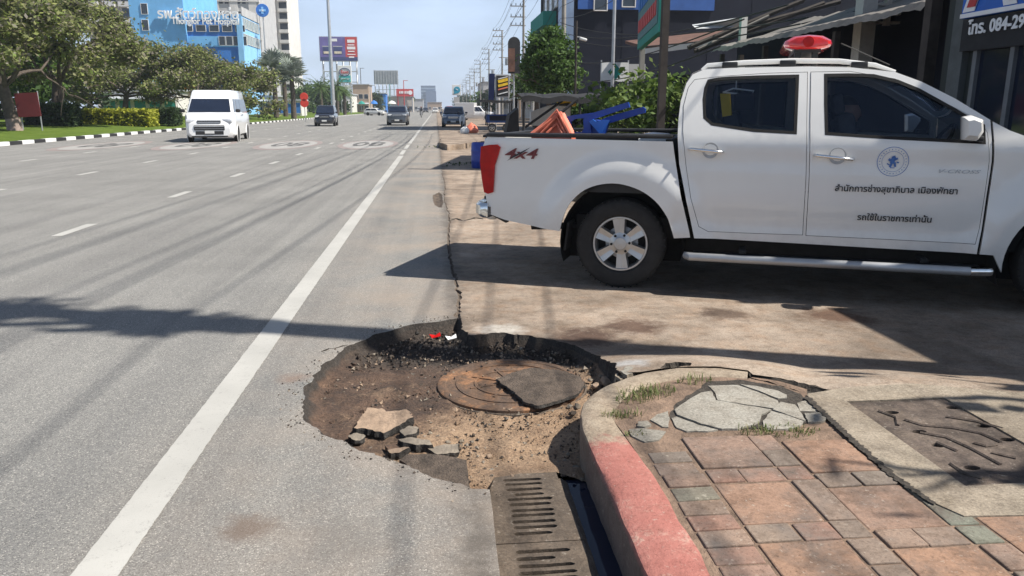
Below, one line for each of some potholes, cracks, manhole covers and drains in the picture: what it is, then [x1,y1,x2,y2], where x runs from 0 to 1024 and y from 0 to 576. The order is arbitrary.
drain grate [490,472,584,545]
drain grate [496,540,590,576]
manhole cover [436,359,587,417]
crack [441,172,482,322]
pothole [302,319,620,490]
manhole cover [850,399,1024,486]
